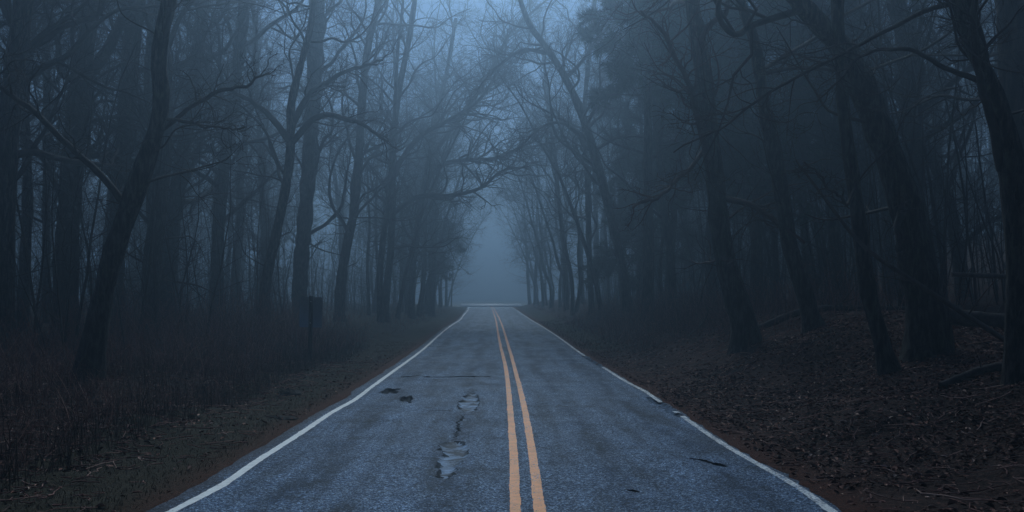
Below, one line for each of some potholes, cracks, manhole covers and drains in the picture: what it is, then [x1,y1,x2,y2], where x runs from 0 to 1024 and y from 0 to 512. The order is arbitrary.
pothole [457,393,480,413]
crack [436,410,464,438]
pothole [435,441,471,480]
